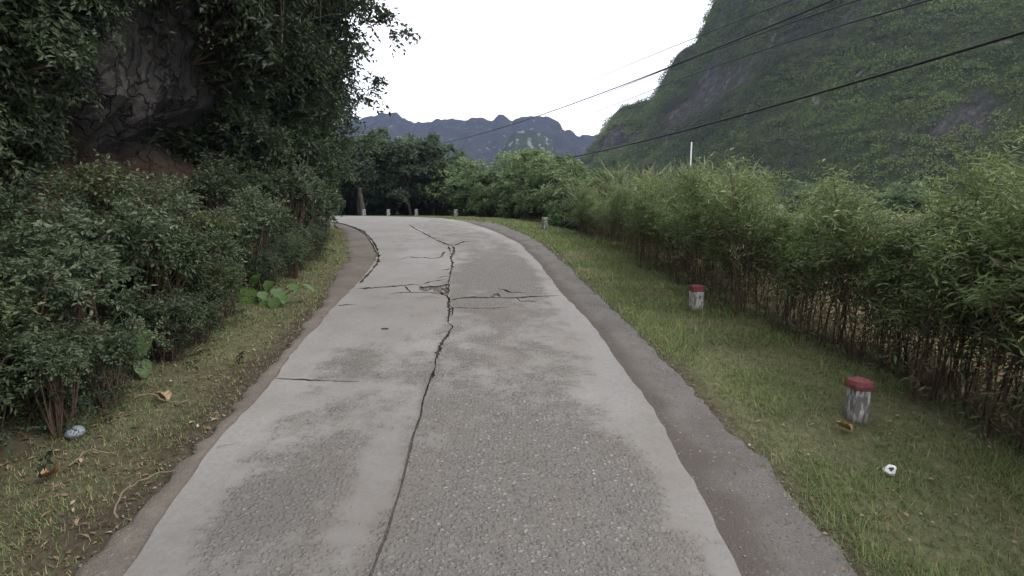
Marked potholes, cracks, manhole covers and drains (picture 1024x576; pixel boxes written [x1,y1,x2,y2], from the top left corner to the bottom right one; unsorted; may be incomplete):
crack [276,225,543,576]
